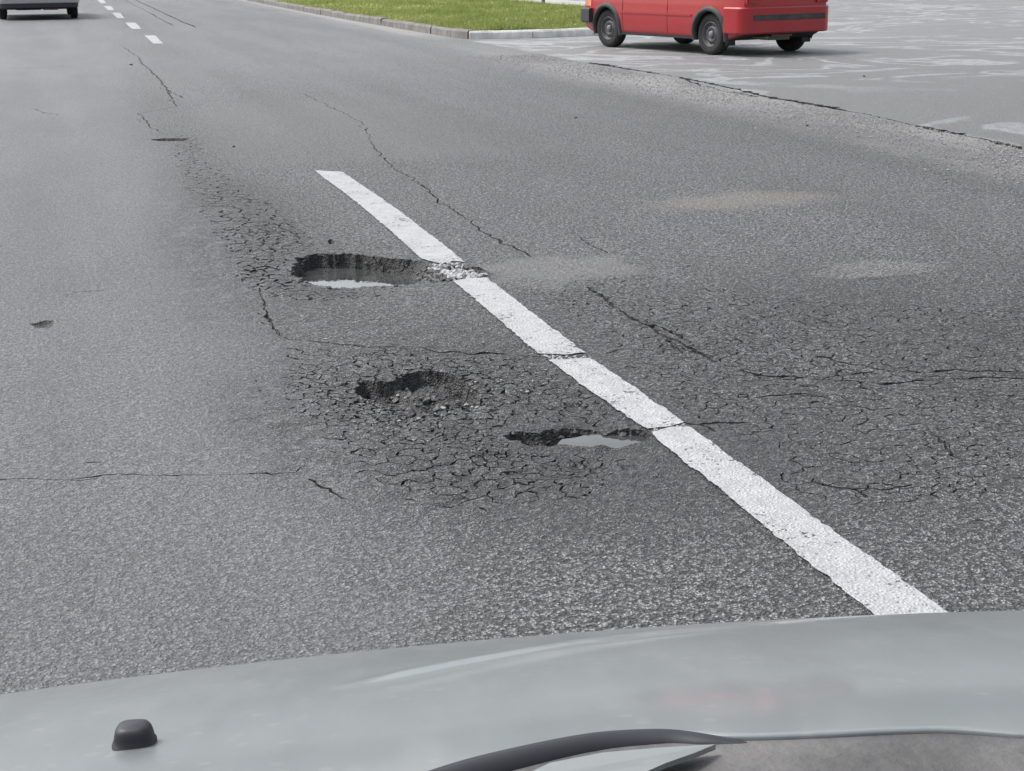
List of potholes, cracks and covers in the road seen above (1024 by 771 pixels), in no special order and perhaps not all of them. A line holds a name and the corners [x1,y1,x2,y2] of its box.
crack [533,275,1024,509]
crack [176,135,629,512]
pothole [354,370,478,415]
crack [0,462,350,500]
pothole [29,320,54,328]
crack [308,96,531,257]
crack [124,47,183,131]
pothole [286,251,493,290]
pothole [503,428,655,447]
